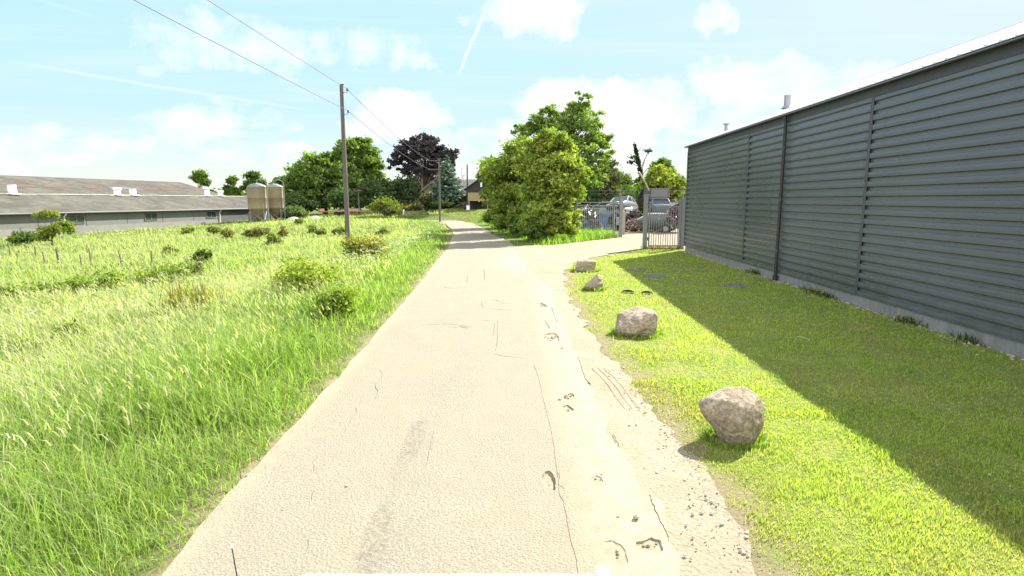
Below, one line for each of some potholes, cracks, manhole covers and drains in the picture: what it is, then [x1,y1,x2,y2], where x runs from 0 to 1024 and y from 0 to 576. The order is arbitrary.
crack [649,495,669,541]
crack [432,300,578,574]
crack [577,357,619,446]
